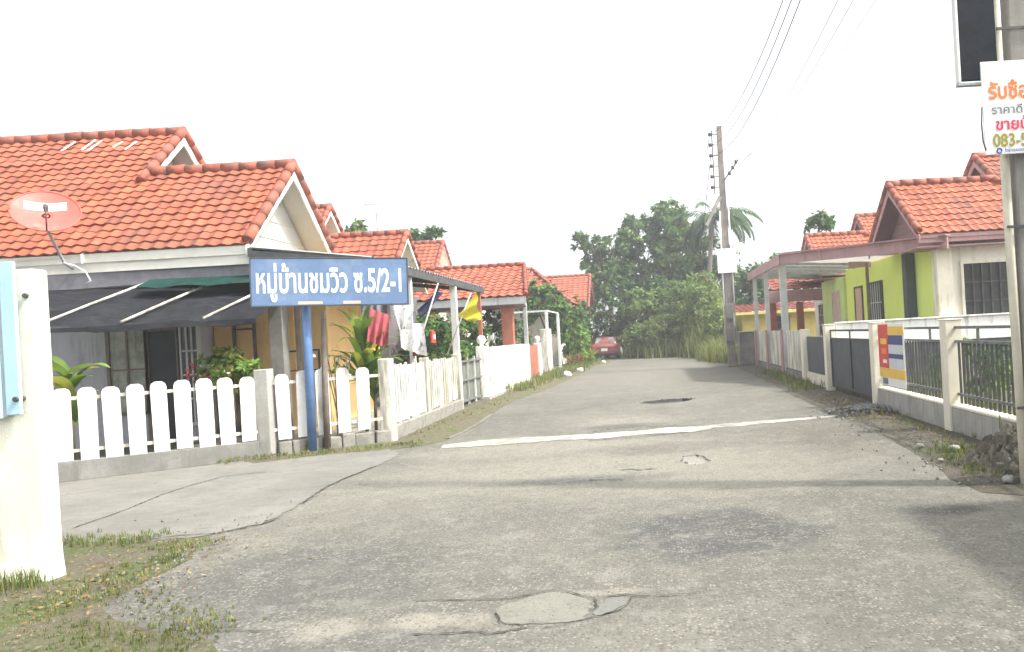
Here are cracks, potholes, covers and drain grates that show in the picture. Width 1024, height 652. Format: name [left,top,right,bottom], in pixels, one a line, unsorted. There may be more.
crack [134,518,277,541]
crack [412,589,695,634]
crack [74,472,261,528]
pothole [680,454,711,464]
crack [303,466,376,503]
